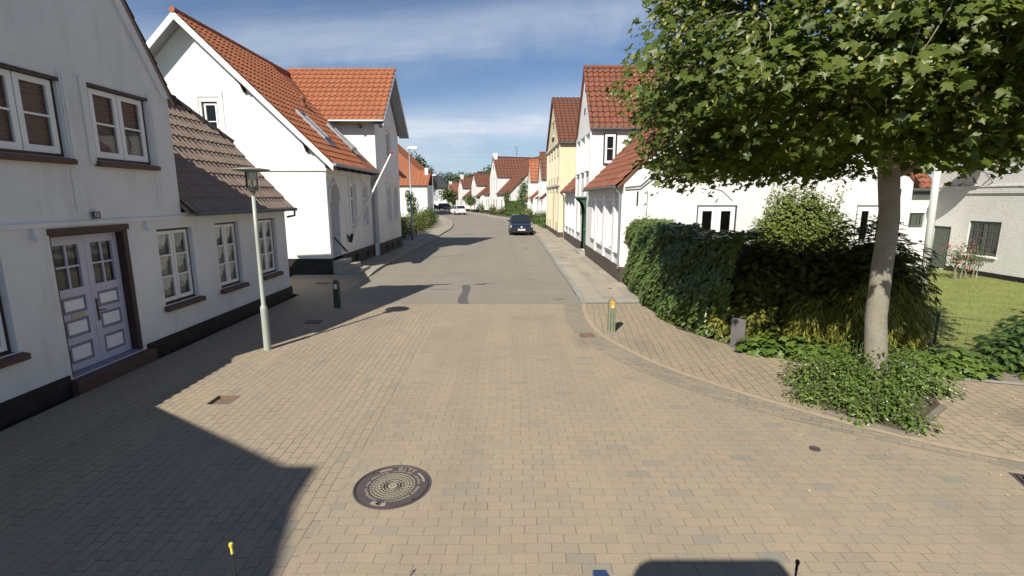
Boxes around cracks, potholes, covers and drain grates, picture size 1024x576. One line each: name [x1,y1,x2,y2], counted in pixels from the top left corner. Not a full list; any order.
manhole cover [353,465,431,510]
